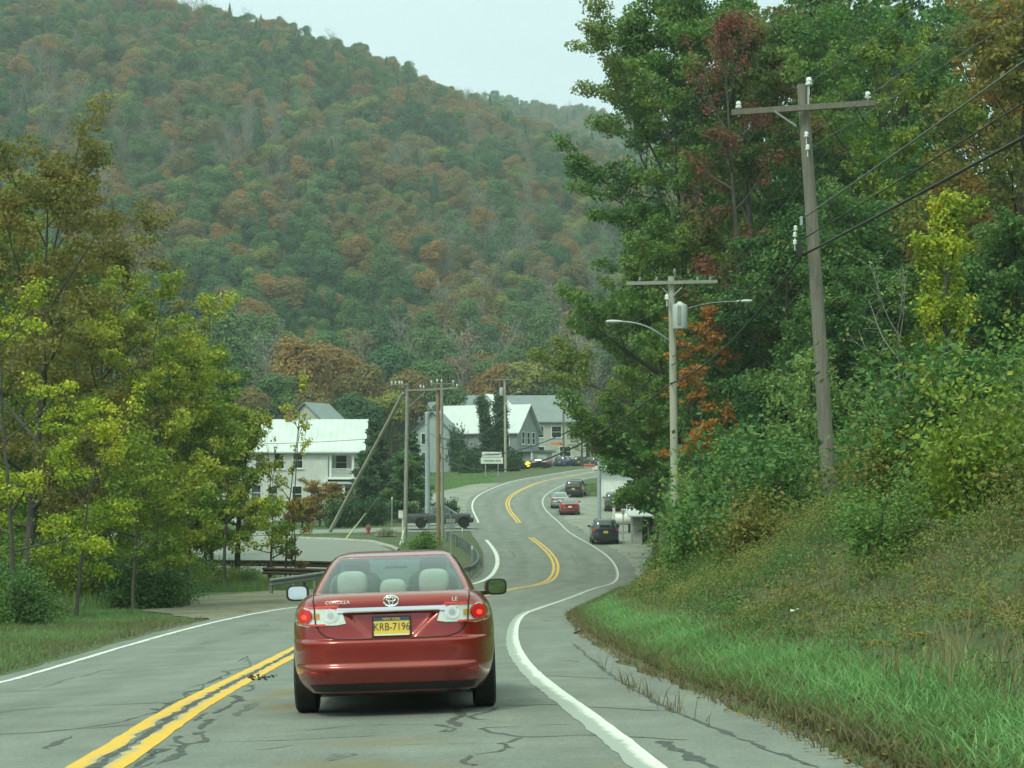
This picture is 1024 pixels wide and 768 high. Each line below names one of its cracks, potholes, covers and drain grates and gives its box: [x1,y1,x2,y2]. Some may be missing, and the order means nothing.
crack [132,685,387,768]
crack [406,704,719,768]
crack [0,669,160,749]
